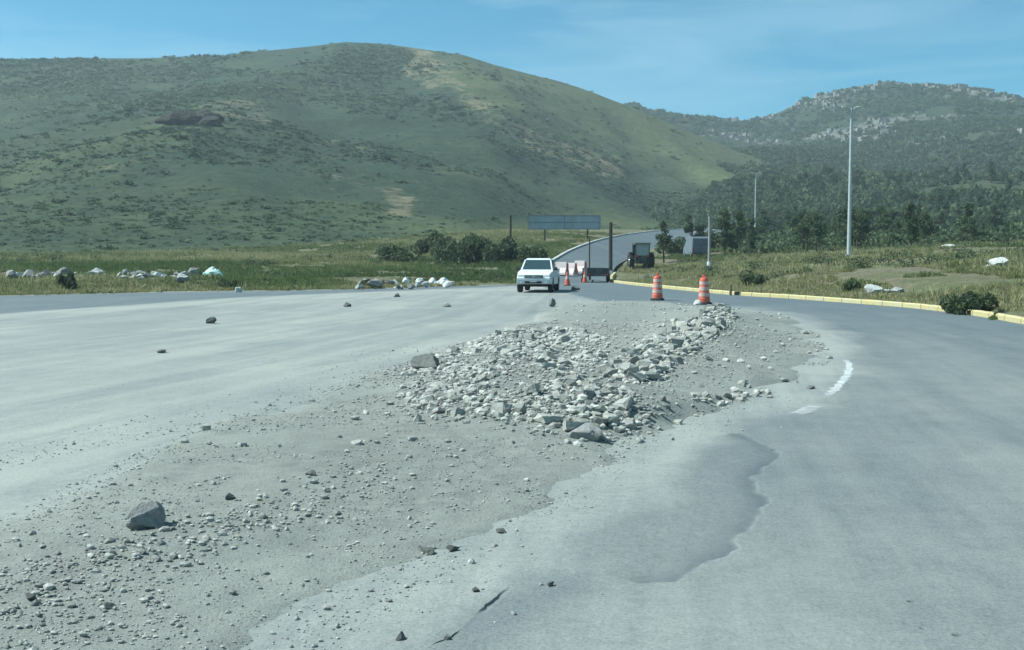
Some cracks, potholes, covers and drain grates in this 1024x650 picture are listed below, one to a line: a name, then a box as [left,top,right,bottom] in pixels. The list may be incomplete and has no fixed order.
pothole [556,431,807,596]
crack [401,566,553,650]
